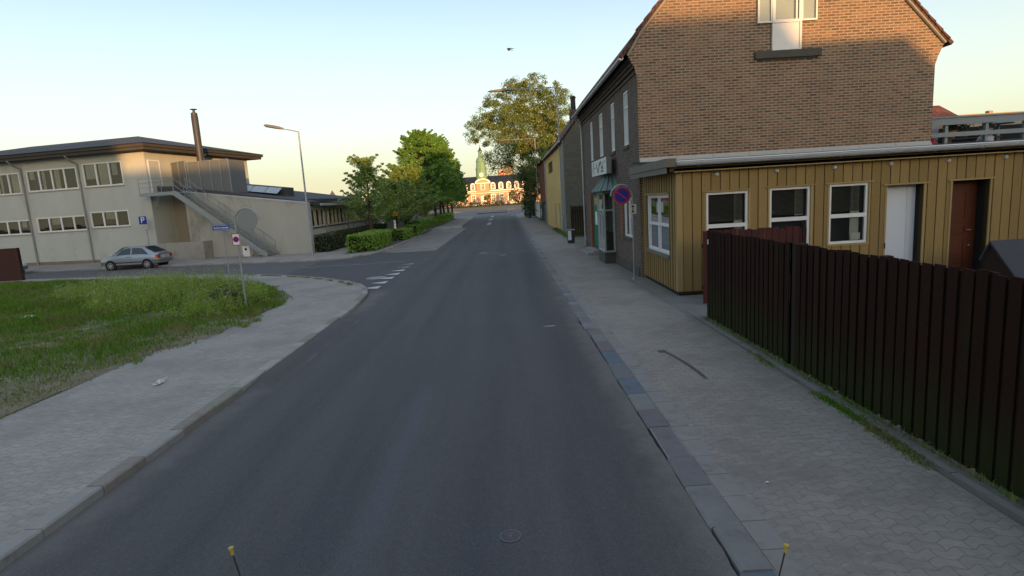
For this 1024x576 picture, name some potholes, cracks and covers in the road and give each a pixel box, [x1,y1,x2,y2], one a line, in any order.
manhole cover [500,529,521,543]
